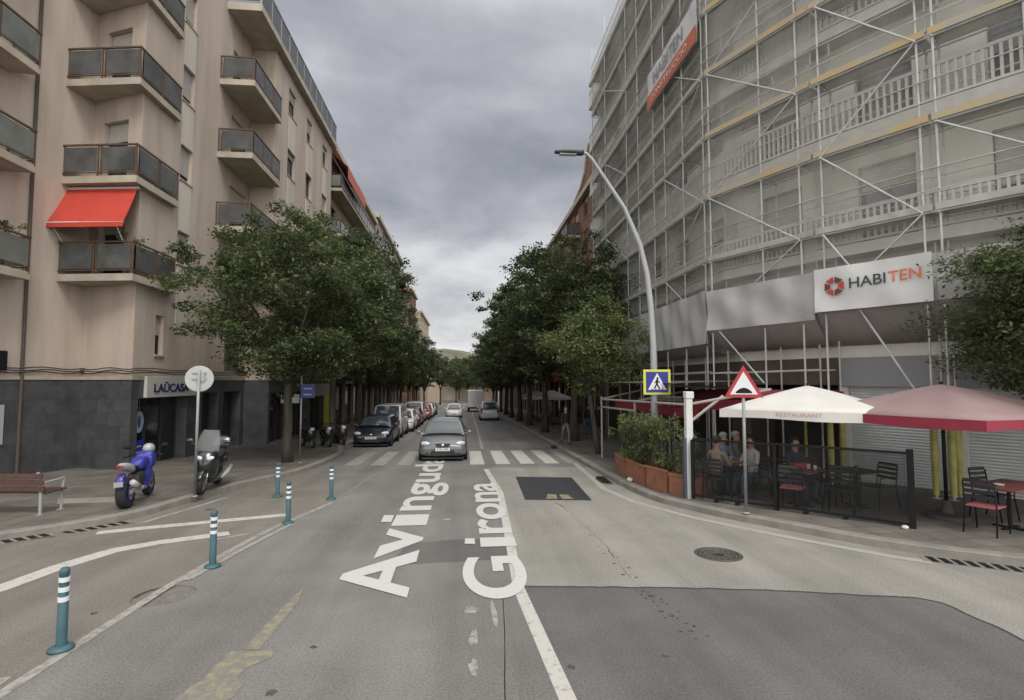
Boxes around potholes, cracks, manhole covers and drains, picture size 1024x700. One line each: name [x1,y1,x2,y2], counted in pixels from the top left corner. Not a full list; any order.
drain grate [63,520,134,533]
manhole cover [694,547,744,562]
manhole cover [127,584,199,608]
drain grate [0,532,55,545]
crack [555,502,710,640]
drain grate [919,555,1024,573]
